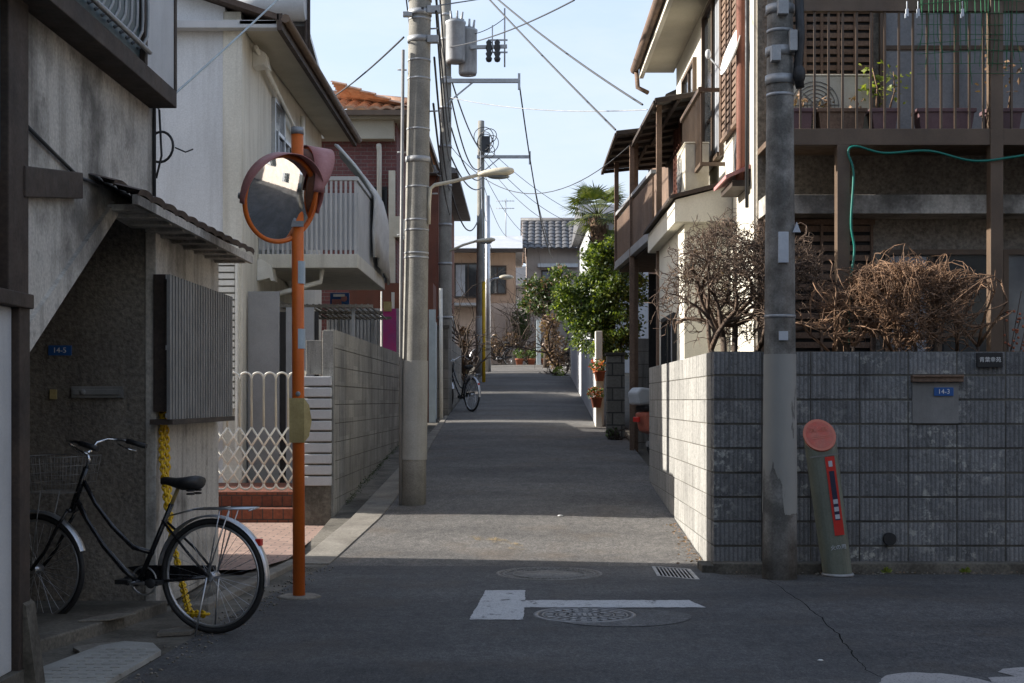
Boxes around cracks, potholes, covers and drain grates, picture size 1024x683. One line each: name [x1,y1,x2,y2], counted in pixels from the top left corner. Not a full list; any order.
crack [770,581,881,677]
manhole cover [533,607,636,623]
drain grate [652,566,700,580]
manhole cover [496,567,603,580]
